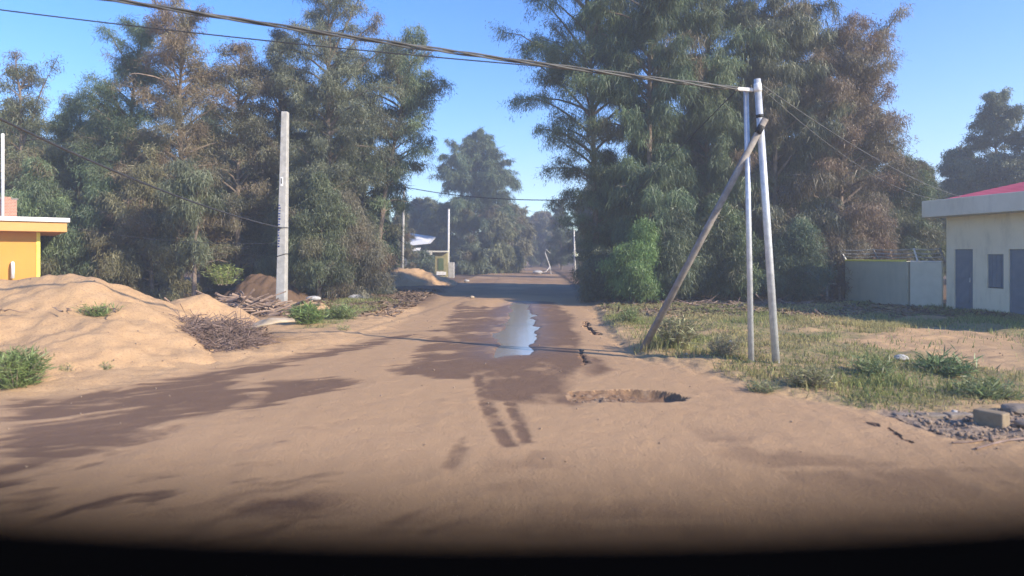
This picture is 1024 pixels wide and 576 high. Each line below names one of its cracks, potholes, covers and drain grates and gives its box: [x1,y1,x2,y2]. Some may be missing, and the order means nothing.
crack [863,416,941,443]
crack [577,321,602,365]
pothole [565,389,688,403]
